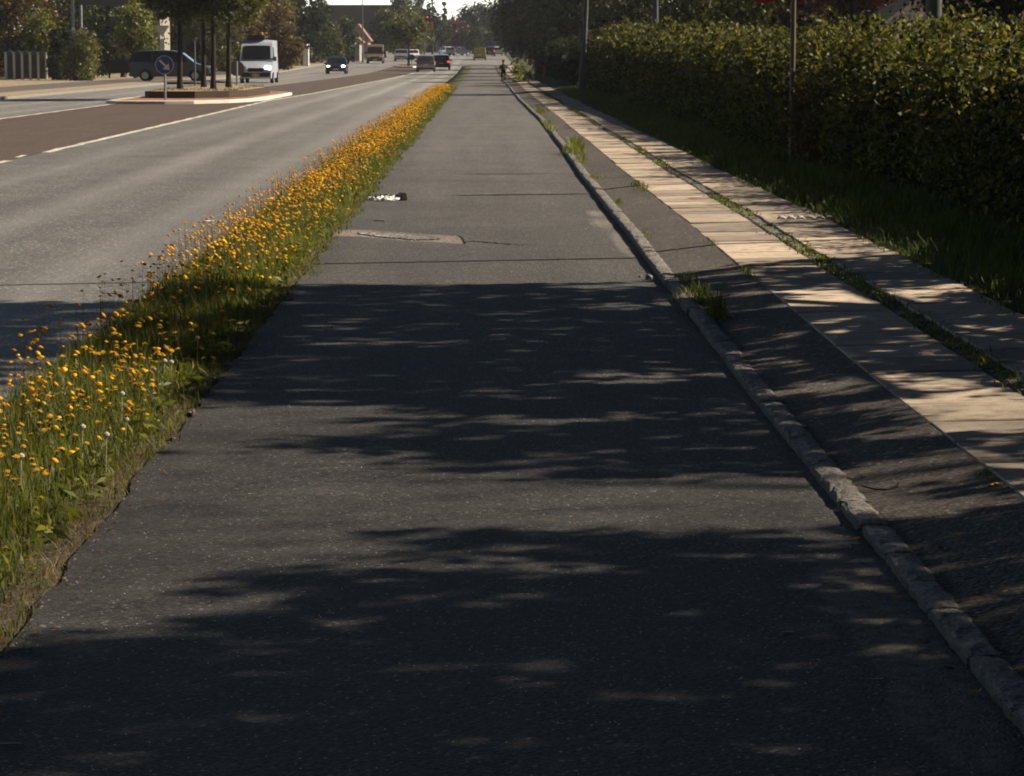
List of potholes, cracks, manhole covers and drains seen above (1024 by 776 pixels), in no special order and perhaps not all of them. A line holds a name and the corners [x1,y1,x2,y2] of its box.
crack [456,235,528,245]
